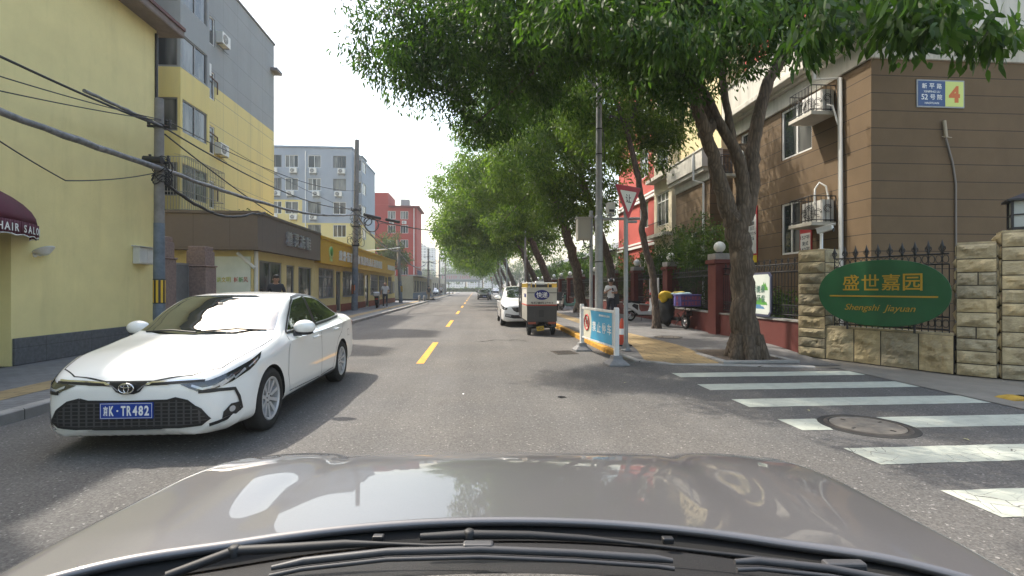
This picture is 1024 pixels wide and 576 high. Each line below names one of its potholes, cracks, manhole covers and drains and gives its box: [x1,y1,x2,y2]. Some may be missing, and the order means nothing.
manhole cover [817,414,923,439]
